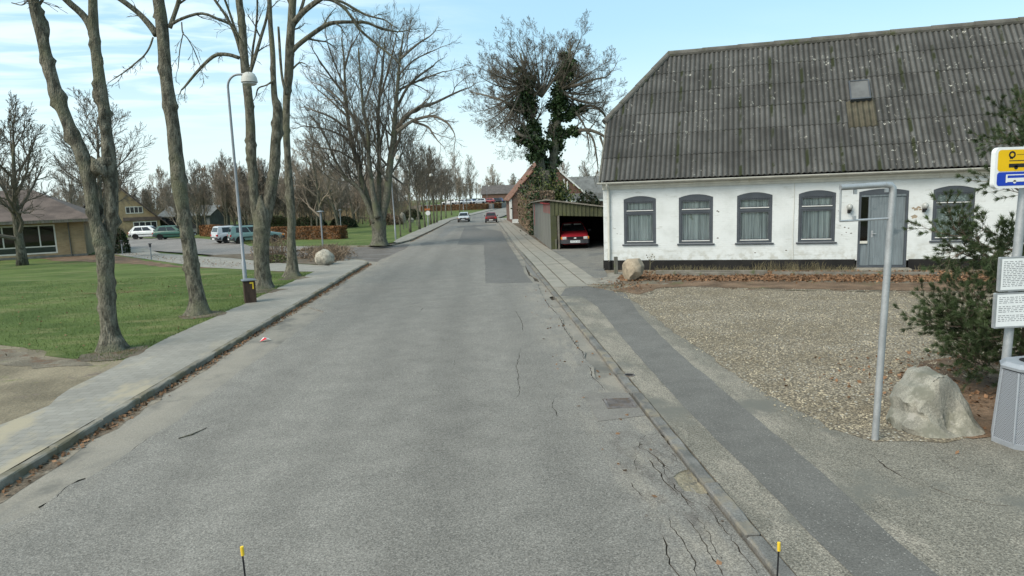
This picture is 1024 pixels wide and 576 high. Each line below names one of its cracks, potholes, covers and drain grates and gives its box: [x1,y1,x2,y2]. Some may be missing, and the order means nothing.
crack [544,299,603,388]
crack [620,434,757,576]
crack [871,454,1013,507]
